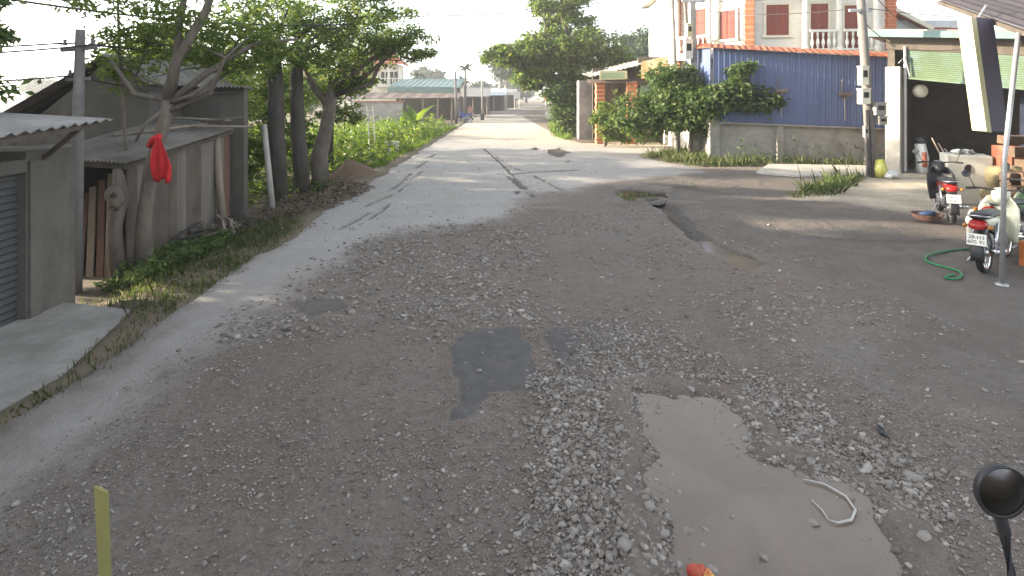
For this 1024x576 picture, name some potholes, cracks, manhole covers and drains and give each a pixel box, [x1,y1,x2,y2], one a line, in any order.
pothole [608,188,679,206]
crack [481,148,582,198]
